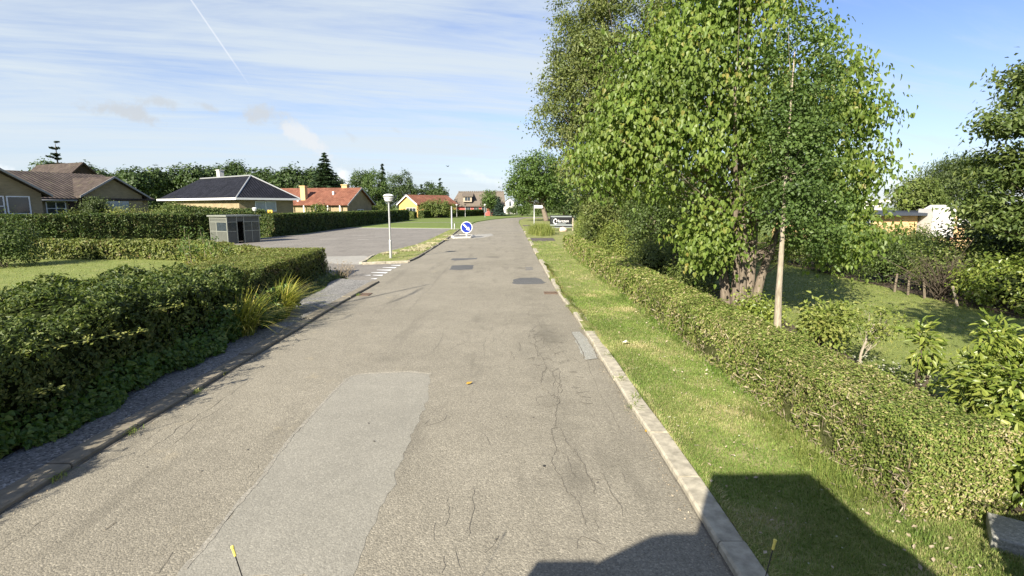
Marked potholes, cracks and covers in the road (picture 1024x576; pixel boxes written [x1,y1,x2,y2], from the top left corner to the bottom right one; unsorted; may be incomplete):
crack [509,314,734,576]
crack [442,491,499,572]
